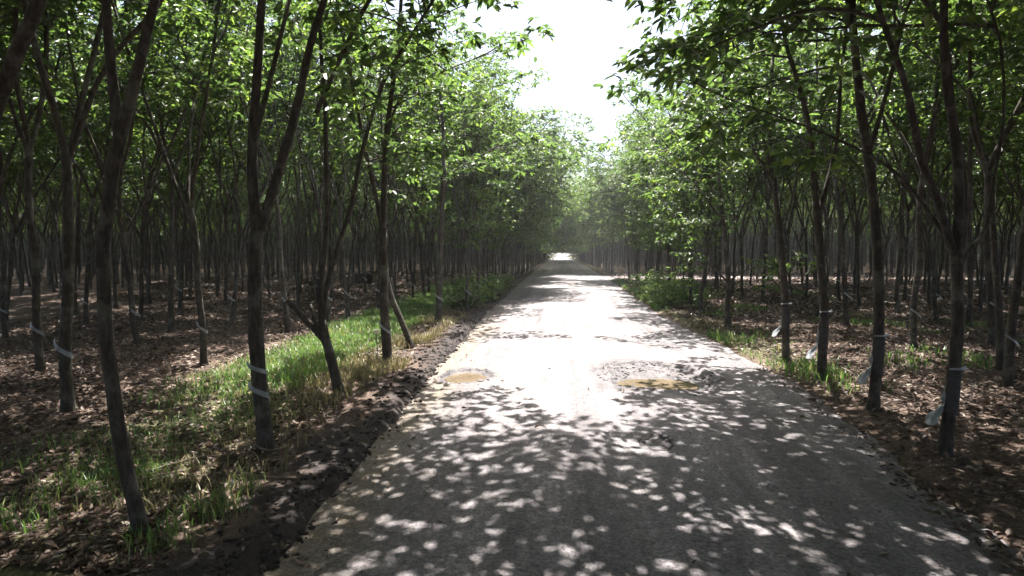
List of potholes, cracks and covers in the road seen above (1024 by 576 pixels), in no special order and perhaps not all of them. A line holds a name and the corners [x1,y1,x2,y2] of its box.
pothole [592,359,725,393]
pothole [437,367,497,385]
